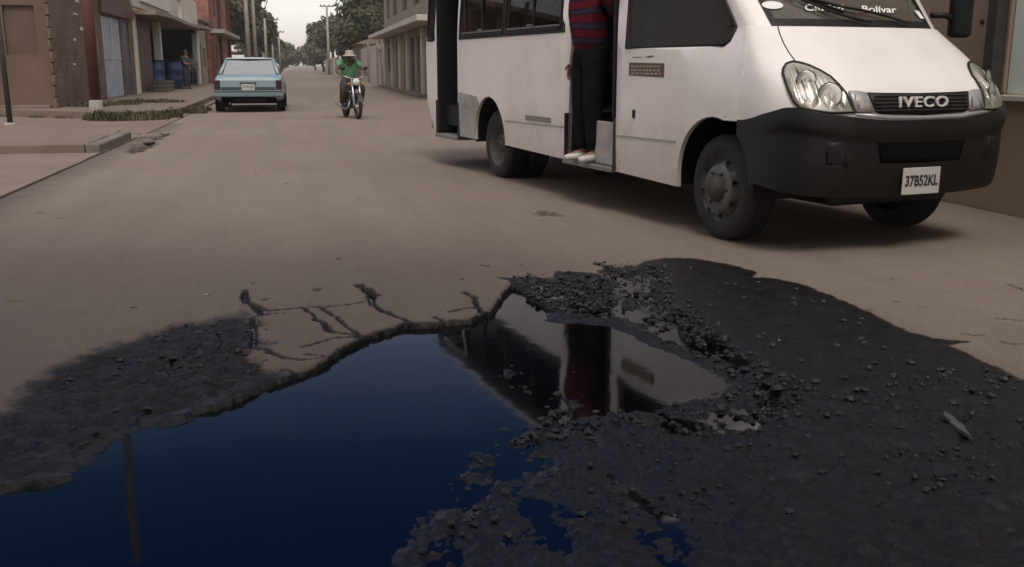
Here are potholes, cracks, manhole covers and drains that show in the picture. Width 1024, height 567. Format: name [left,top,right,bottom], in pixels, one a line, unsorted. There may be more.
crack [1006,283,1024,291]
crack [0,283,411,484]
pothole [108,132,183,154]
crack [429,290,485,322]
crack [959,317,1024,345]
pothole [0,262,801,567]
